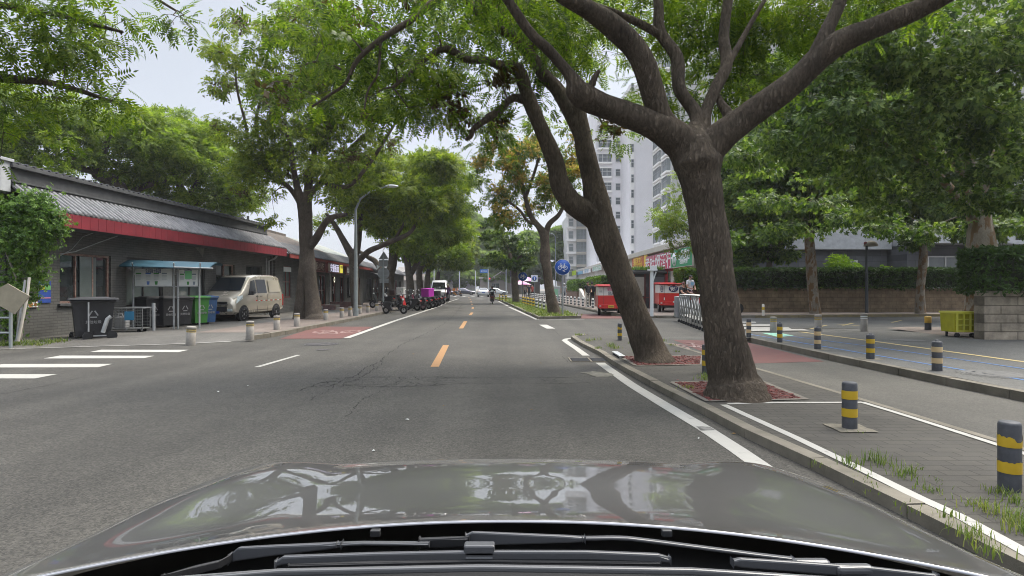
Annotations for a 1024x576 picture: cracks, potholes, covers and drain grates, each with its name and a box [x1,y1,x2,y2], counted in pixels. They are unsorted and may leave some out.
drain grate [568,351,625,362]
crack [292,317,595,416]
